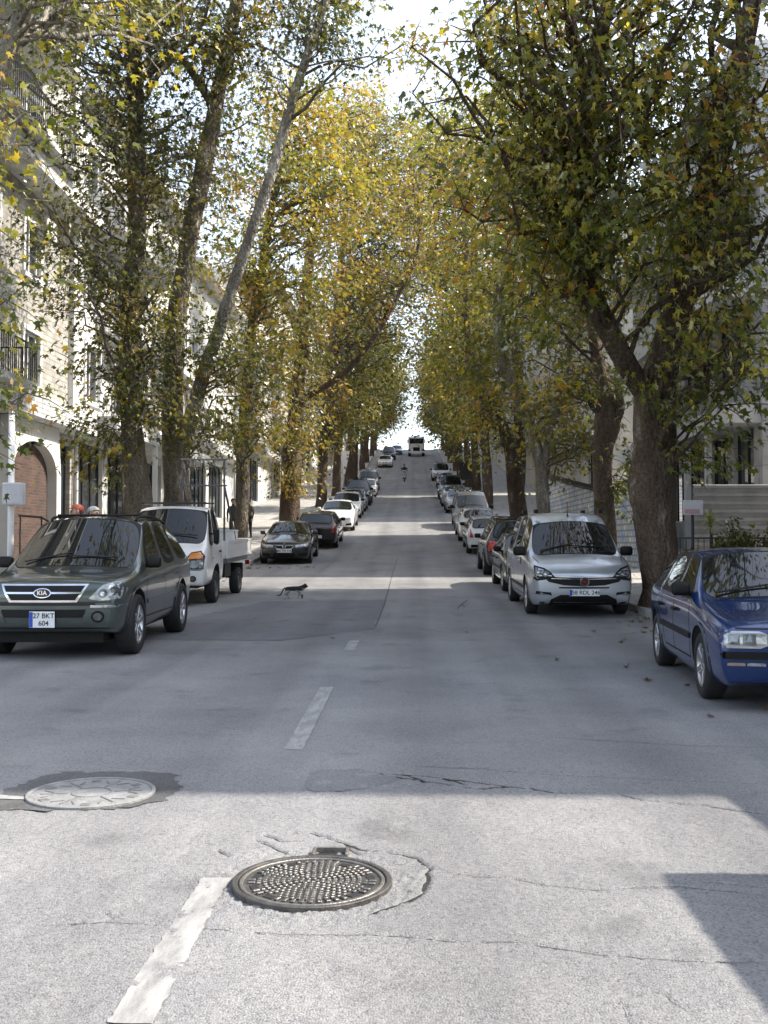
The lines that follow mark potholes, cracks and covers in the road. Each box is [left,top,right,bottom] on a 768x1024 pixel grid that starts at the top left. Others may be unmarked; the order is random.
crack [380,773,554,793]
crack [218,833,432,916]
crack [456,863,767,896]
manhole cover [232,846,392,913]
manhole cover [25,777,156,811]
crack [49,916,741,963]
